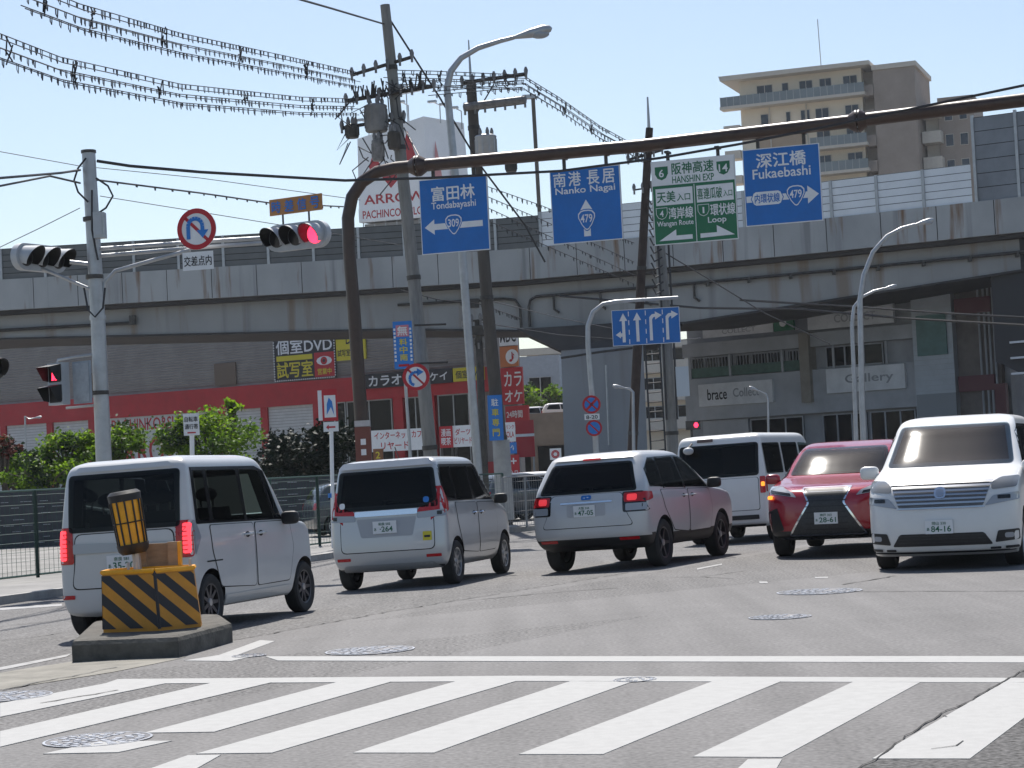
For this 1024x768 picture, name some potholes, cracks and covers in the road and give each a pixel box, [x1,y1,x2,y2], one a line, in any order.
manhole cover [0,690,53,702]
manhole cover [325,645,415,656]
manhole cover [42,731,153,748]
